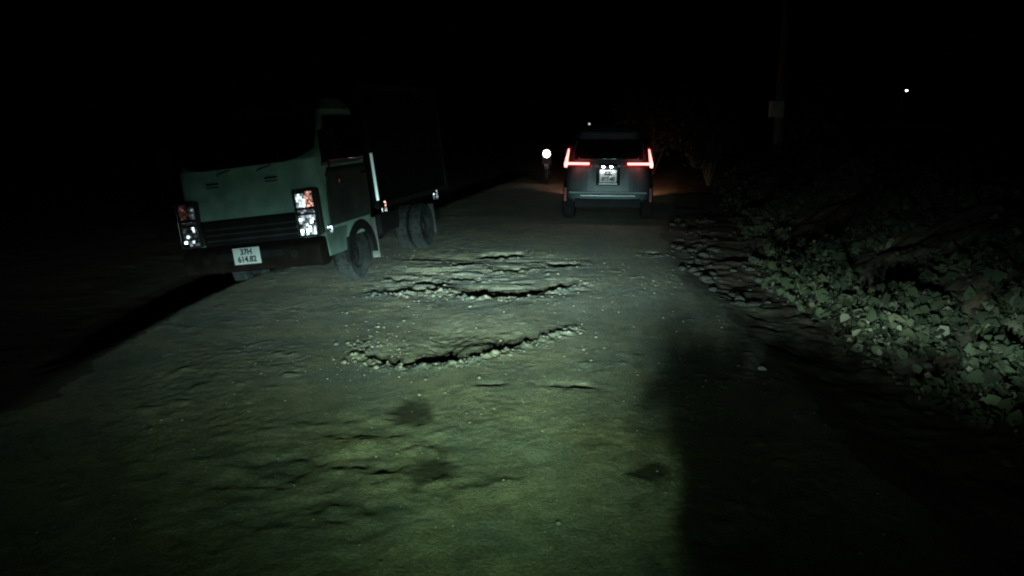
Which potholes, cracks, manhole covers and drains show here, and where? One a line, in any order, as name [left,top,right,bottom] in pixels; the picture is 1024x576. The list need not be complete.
pothole [384,275,416,284]
pothole [443,278,584,298]
pothole [433,273,491,282]
pothole [380,284,440,293]
pothole [367,312,572,366]
pothole [473,251,531,260]
